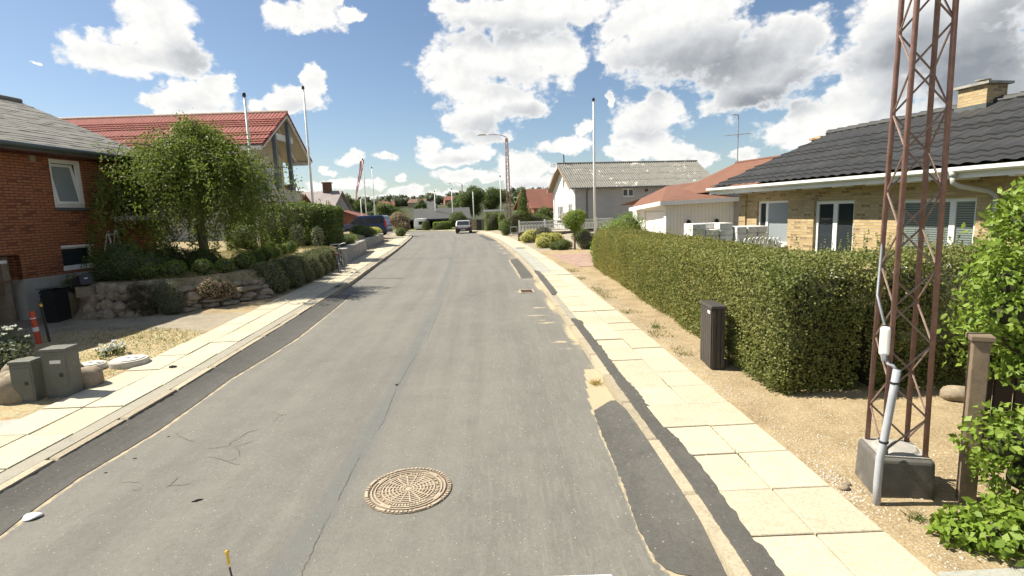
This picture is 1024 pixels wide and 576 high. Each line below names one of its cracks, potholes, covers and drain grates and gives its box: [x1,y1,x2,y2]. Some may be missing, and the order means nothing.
manhole cover [364,467,452,514]
crack [177,412,289,464]
